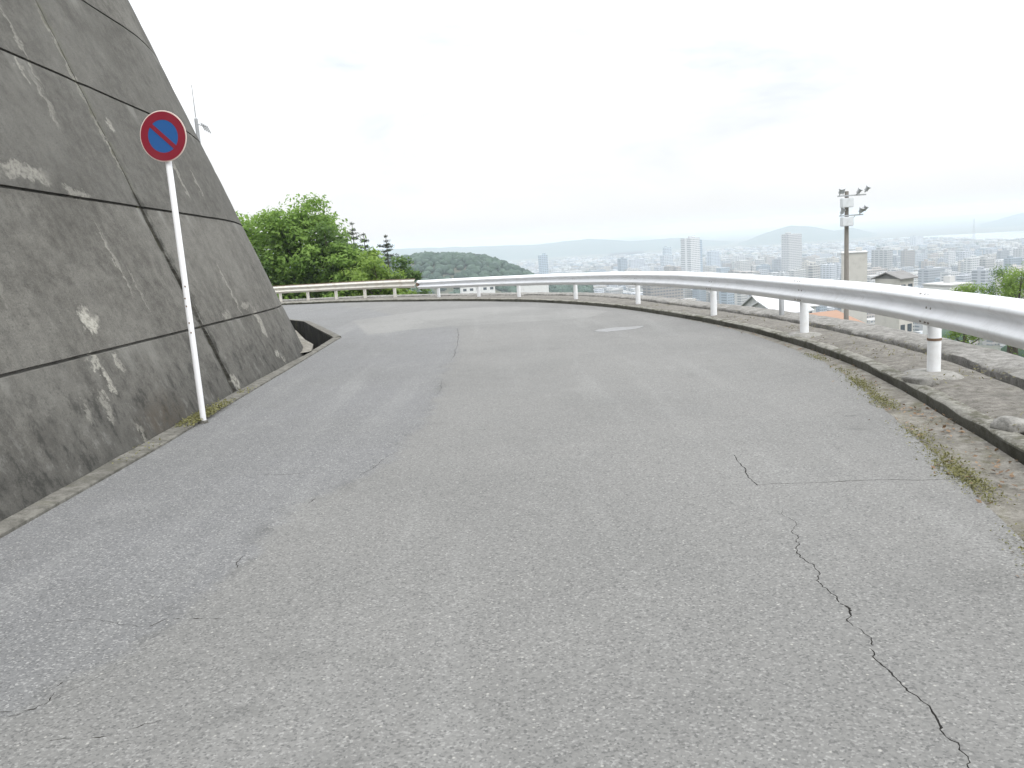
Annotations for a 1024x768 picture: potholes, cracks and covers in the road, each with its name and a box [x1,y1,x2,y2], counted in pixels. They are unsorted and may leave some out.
crack [54,618,222,627]
crack [781,511,971,768]
crack [734,455,977,485]
